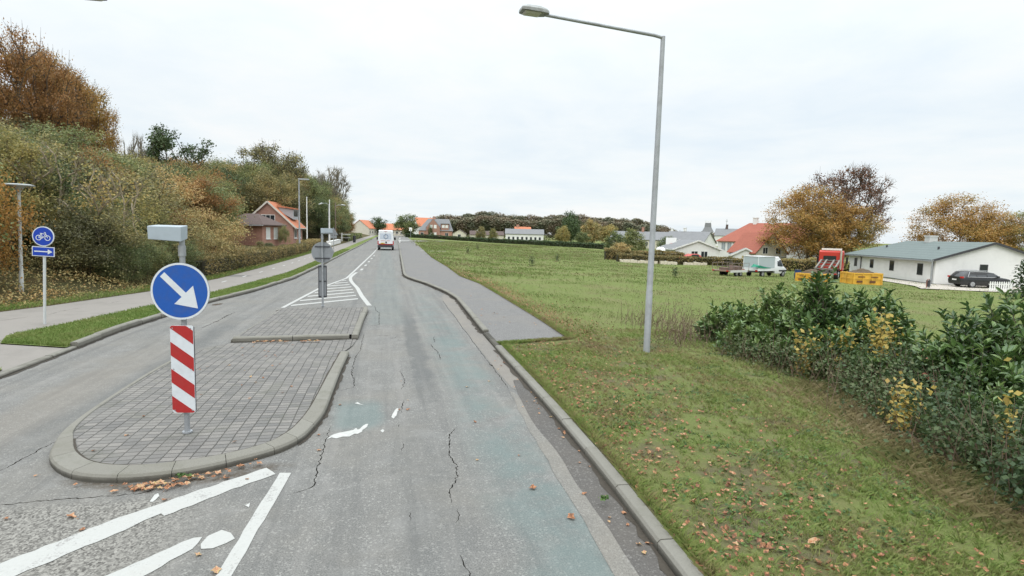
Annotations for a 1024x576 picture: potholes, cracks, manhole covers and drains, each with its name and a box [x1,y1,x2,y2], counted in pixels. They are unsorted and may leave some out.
crack [448,429,460,523]
crack [292,426,331,494]
